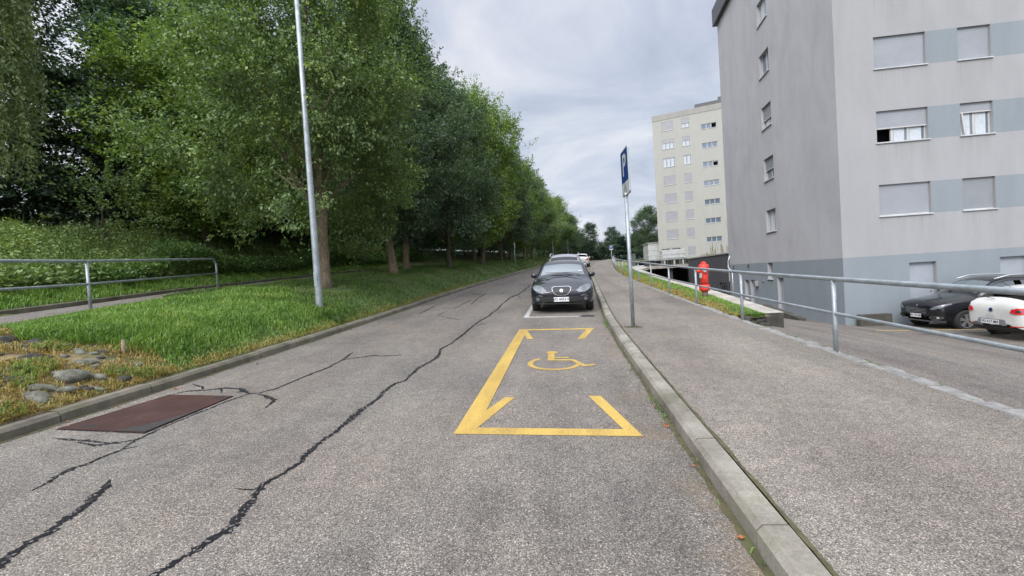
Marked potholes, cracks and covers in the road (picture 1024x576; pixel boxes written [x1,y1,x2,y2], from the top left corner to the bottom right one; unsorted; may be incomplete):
manhole cover [55,394,233,433]
crack [419,293,495,320]
